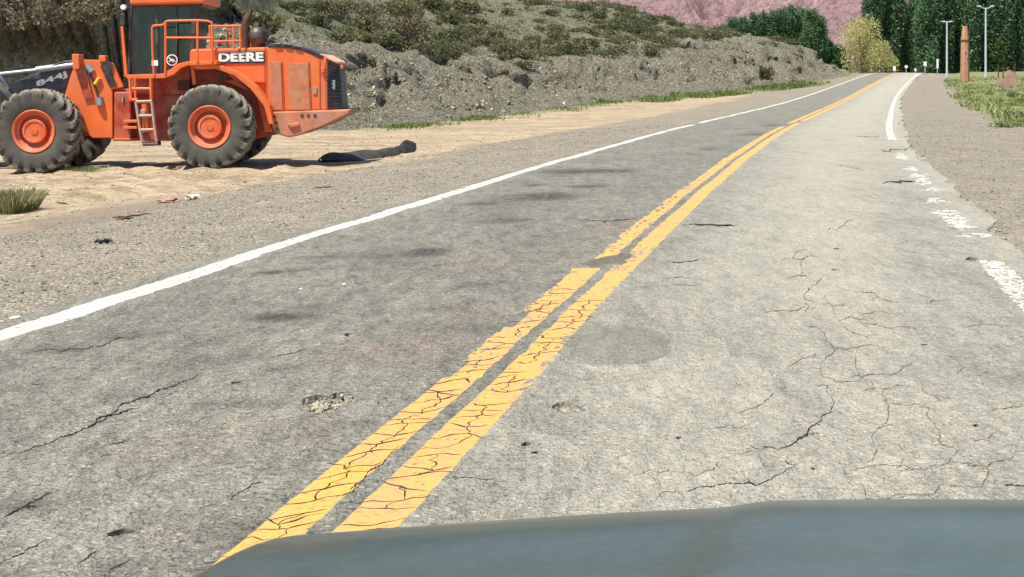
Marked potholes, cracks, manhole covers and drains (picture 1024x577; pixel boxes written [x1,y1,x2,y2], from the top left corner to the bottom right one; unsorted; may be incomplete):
crack [31,335,141,353]
crack [4,492,51,517]
pothole [302,392,356,414]
crack [655,249,1024,501]
pothole [552,402,588,413]
crack [1,372,207,458]
